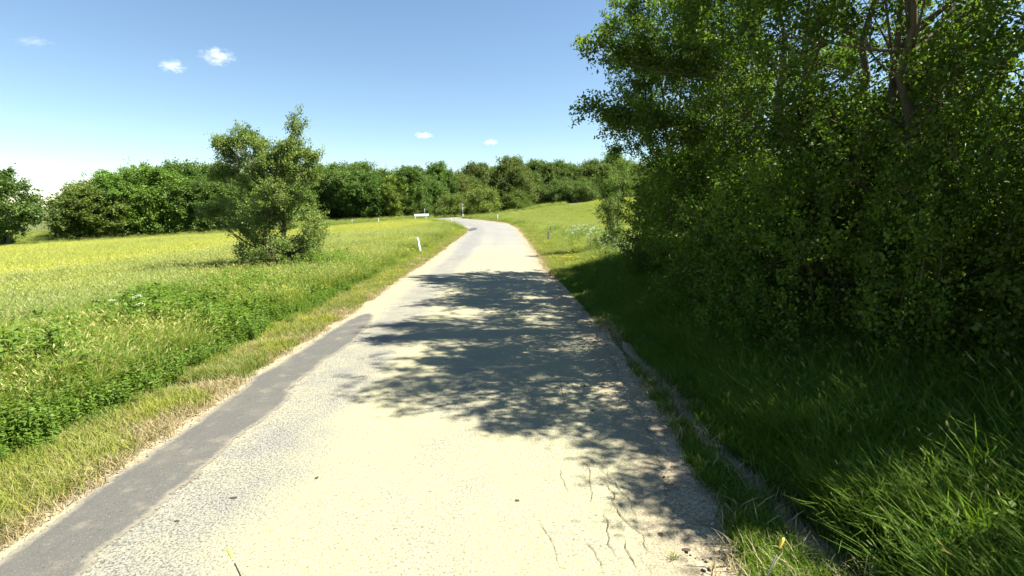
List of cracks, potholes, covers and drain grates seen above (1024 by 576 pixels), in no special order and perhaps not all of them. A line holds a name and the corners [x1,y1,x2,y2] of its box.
crack [561,461,653,574]
